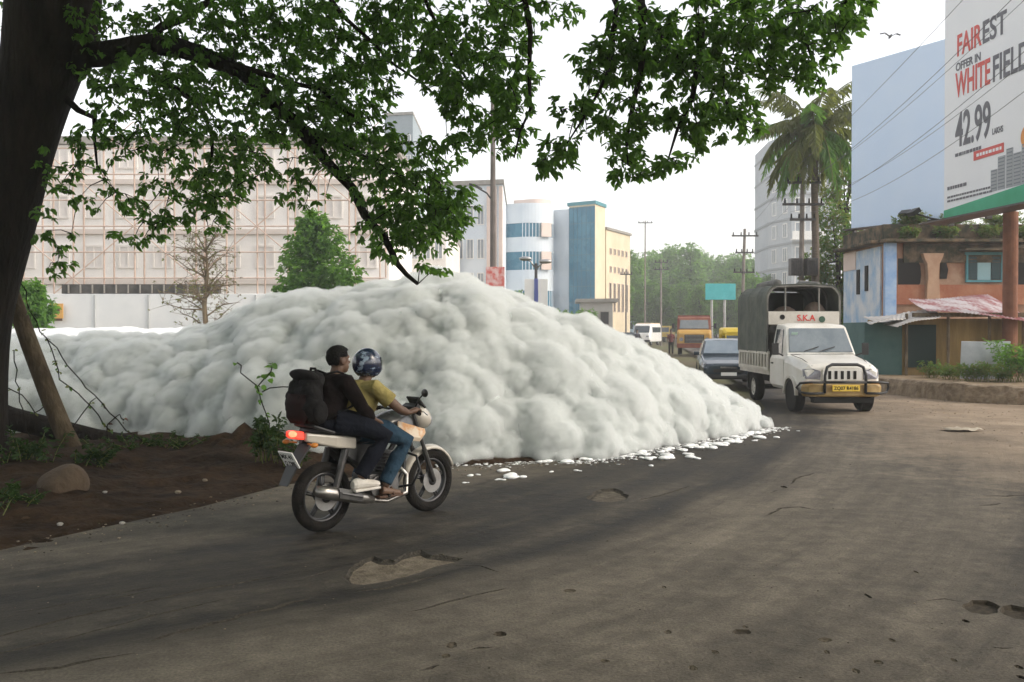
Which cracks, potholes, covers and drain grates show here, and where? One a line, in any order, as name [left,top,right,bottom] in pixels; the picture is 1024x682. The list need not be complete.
pothole [962,600,1000,615]
pothole [587,488,629,502]
pothole [344,550,463,585]
pothole [999,605,1024,620]
crack [766,473,814,516]
crack [355,566,506,612]
